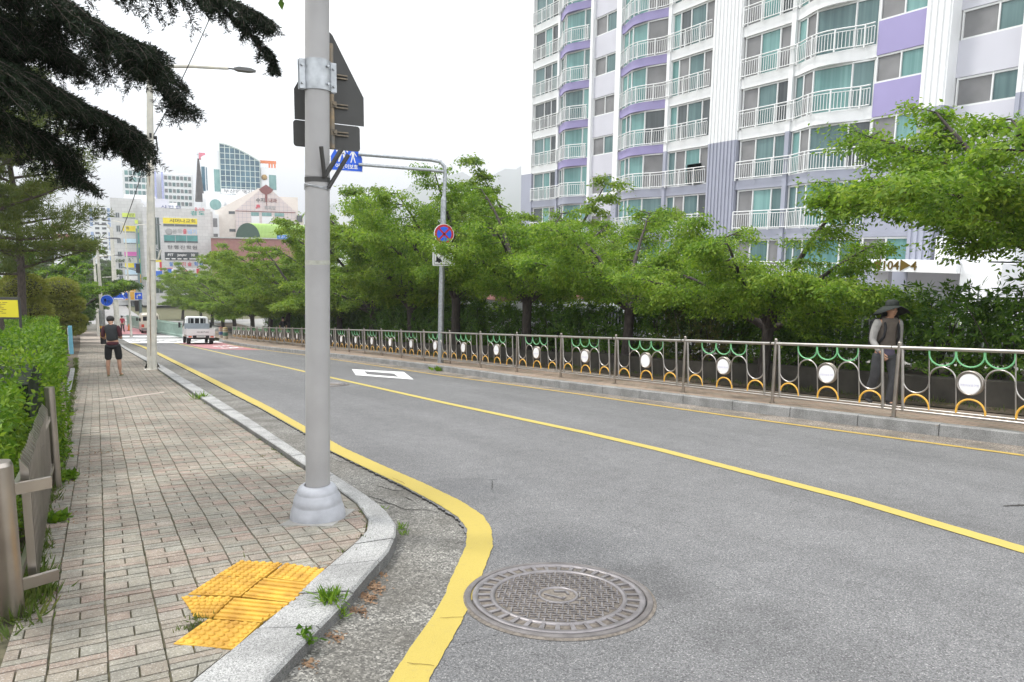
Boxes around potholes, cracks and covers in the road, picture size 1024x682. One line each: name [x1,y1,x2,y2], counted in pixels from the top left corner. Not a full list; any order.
manhole cover [463,562,657,641]
crack [369,478,435,512]
